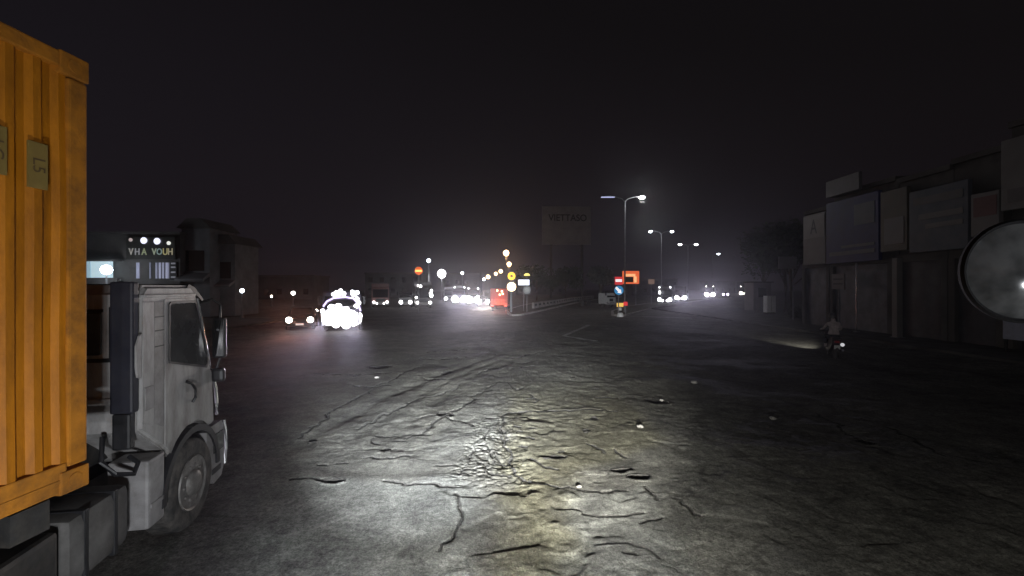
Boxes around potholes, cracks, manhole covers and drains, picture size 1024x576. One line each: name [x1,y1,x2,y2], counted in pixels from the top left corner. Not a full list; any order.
crack [438,493,464,551]
crack [311,350,701,523]
